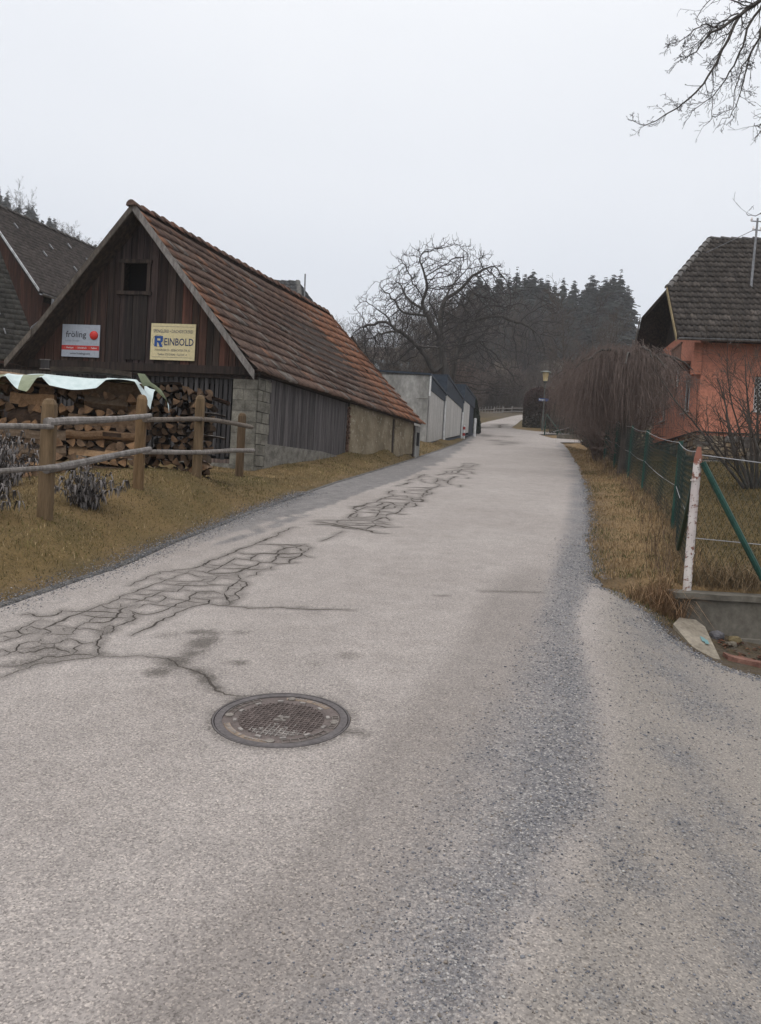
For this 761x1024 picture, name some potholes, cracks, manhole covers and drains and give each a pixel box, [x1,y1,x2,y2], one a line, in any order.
crack [0,527,338,696]
manhole cover [211,693,350,748]
crack [316,463,474,541]
